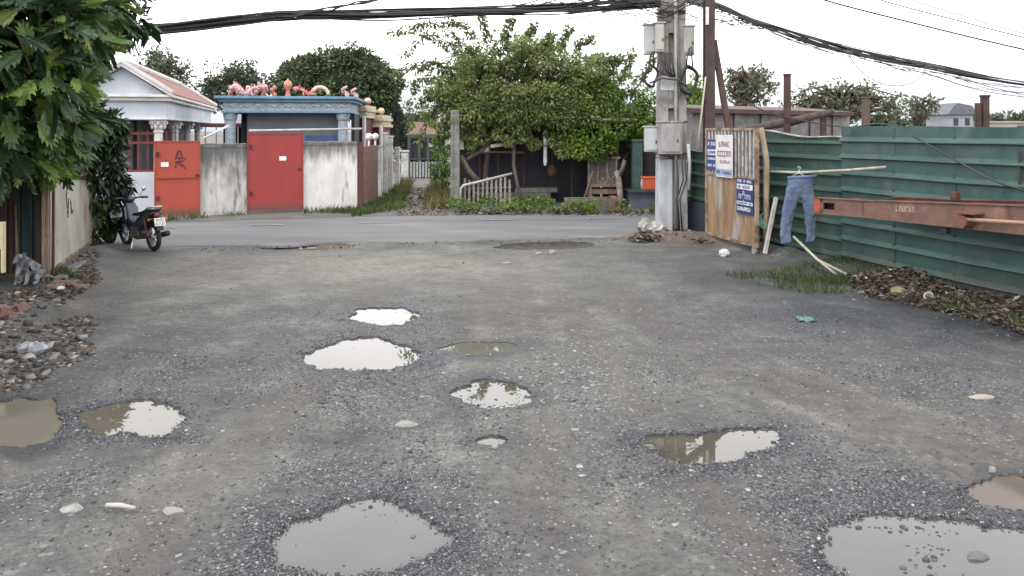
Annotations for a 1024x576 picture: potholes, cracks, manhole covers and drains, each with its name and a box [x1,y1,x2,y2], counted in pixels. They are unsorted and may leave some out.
pothole [814,511,1024,576]
pothole [301,335,422,371]
pothole [74,398,190,437]
pothole [438,341,517,354]
pothole [348,306,423,326]
pothole [963,474,1024,510]
pothole [0,396,64,447]
pothole [475,435,508,445]
pothole [269,494,458,576]
pothole [449,378,538,409]
pothole [638,426,785,465]
